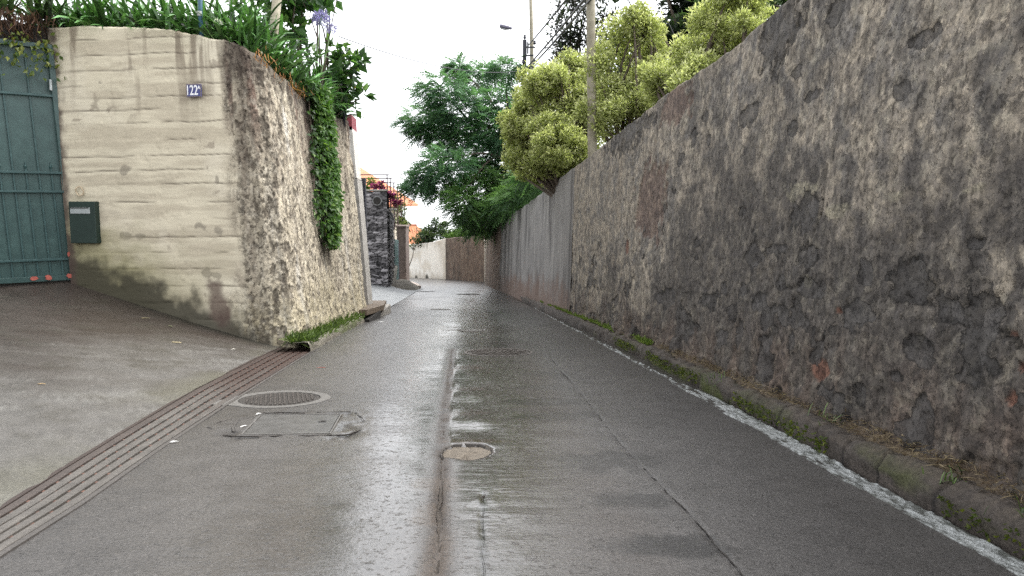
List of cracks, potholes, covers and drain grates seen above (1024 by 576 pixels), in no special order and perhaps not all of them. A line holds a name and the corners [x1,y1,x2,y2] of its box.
manhole cover [212,390,331,408]
drain grate [0,347,319,558]
manhole cover [241,414,342,435]
